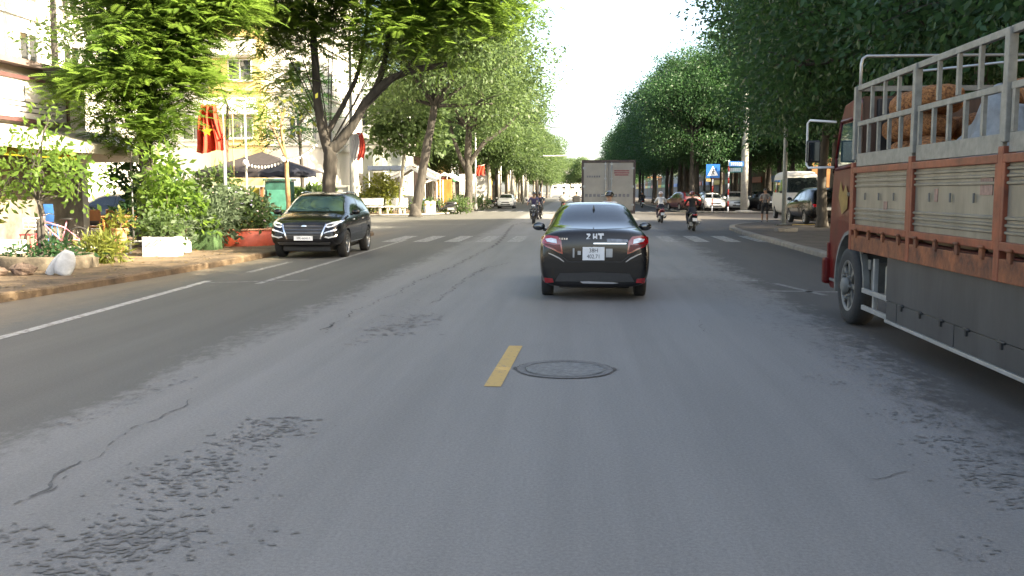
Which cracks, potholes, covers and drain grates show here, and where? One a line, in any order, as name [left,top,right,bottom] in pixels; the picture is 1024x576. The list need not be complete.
manhole cover [513,360,617,378]
crack [13,274,406,504]
crack [344,262,511,345]
